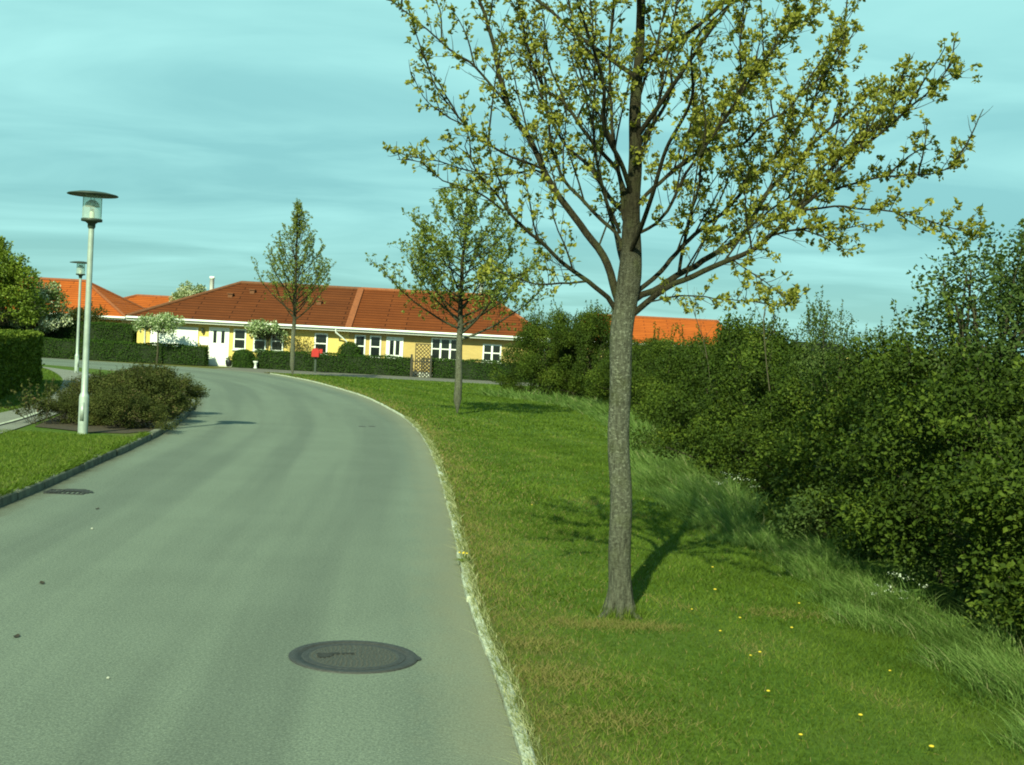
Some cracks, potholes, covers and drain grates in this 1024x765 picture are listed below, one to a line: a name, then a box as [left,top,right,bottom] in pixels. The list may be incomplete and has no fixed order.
manhole cover [288,640,421,674]
